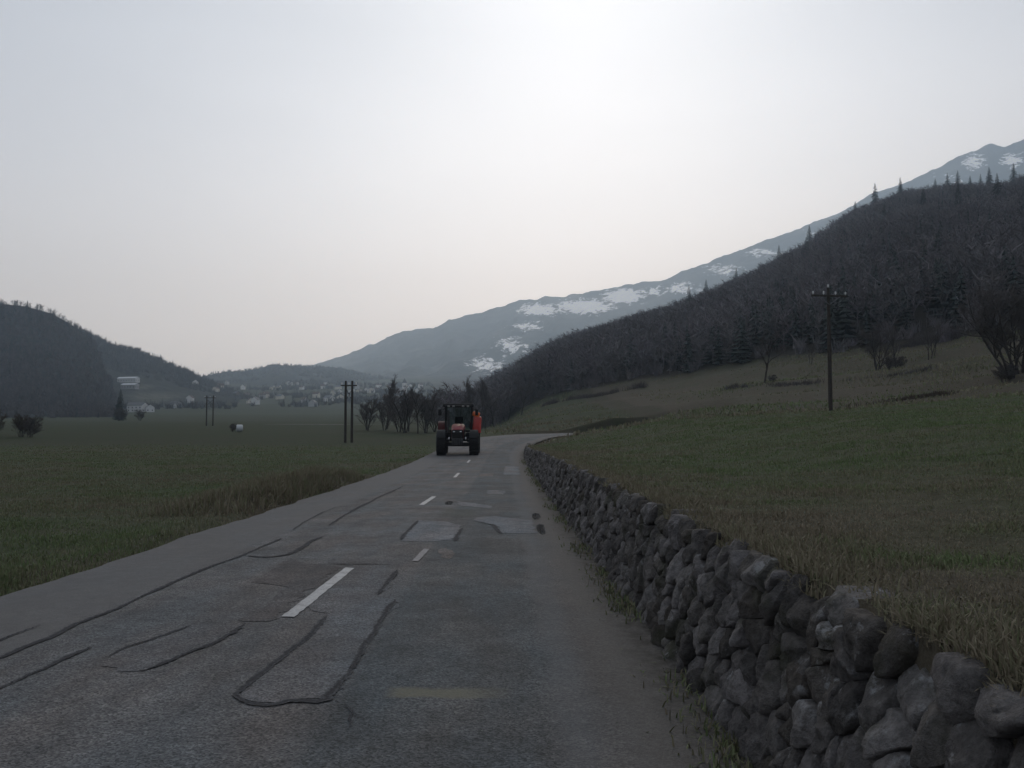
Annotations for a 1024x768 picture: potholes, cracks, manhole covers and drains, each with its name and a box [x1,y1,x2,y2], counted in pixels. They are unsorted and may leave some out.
crack [335,699,365,736]
